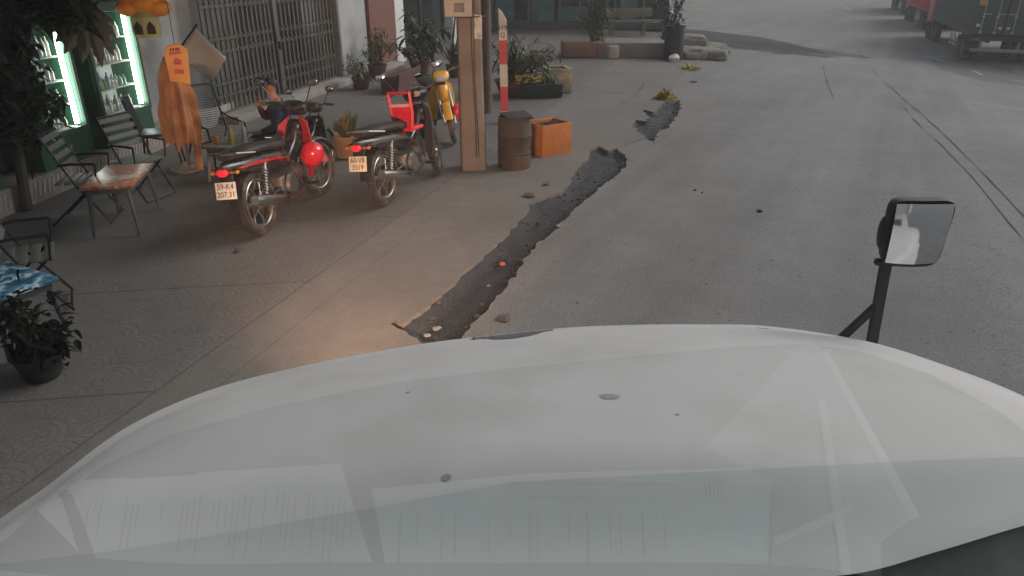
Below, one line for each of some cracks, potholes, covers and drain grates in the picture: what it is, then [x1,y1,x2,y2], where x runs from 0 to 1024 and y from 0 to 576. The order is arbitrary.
pothole [393,149,626,344]
pothole [633,101,680,142]
